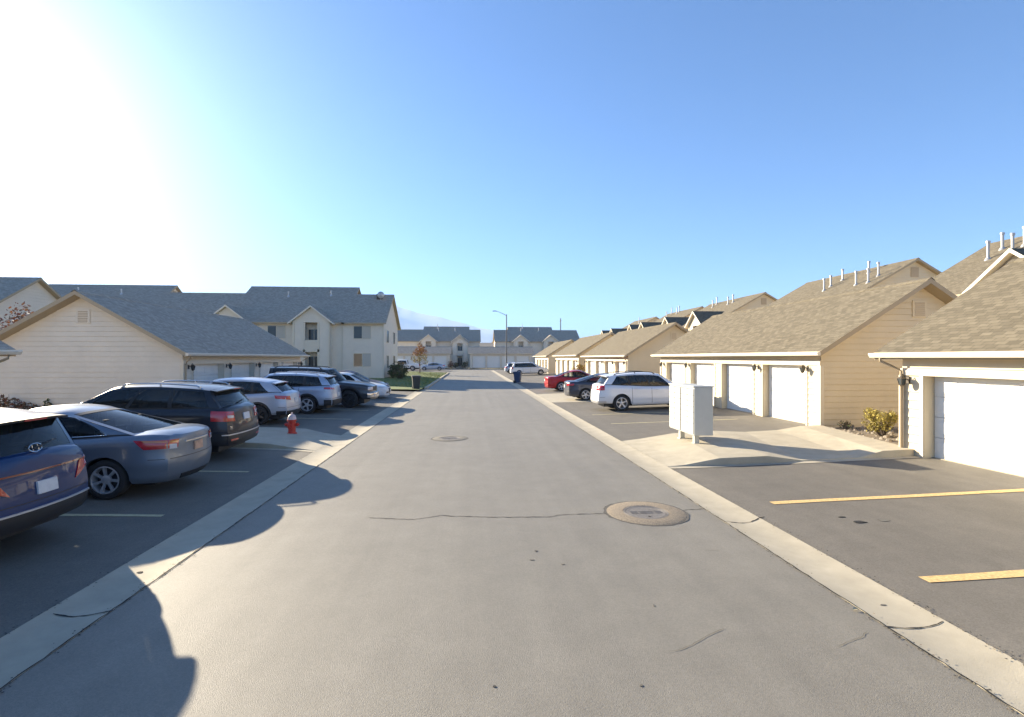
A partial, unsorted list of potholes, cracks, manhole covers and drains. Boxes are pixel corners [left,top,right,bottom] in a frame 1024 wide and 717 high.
manhole cover [603,501,689,526]
